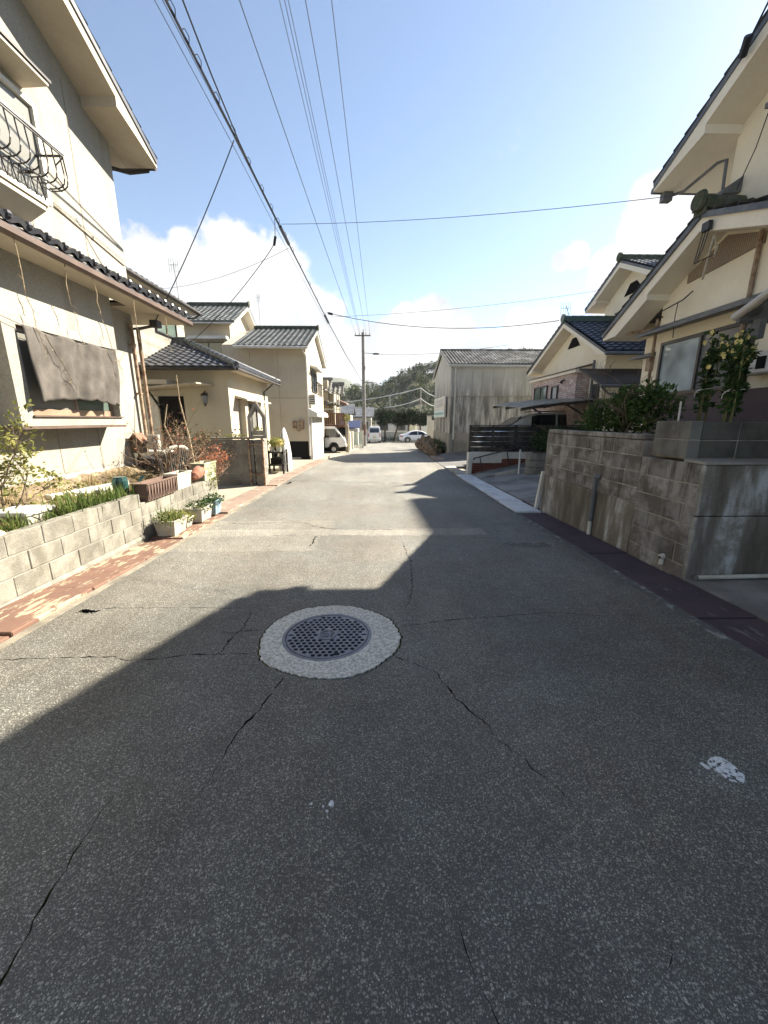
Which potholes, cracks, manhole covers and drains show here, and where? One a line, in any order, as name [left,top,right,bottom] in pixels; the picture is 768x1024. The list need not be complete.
crack [456,913,499,1024]
crack [397,657,592,828]
crack [4,612,255,661]
crack [234,522,429,605]
crack [0,793,118,986]
manhole cover [257,605,403,680]
crack [204,678,283,787]
